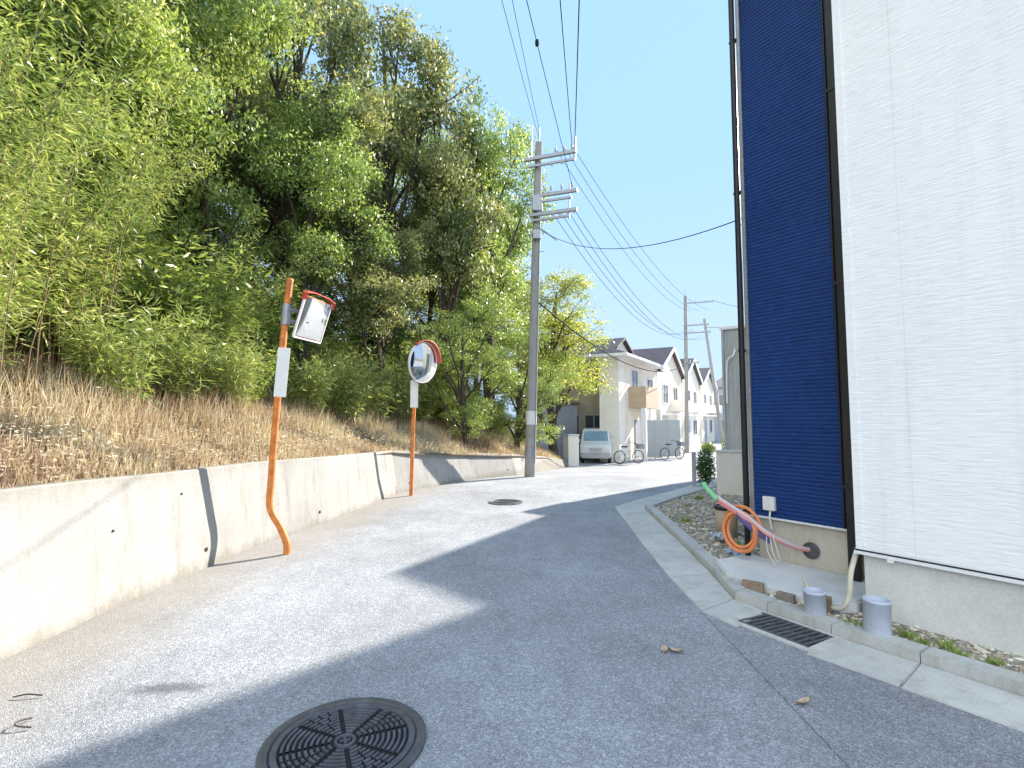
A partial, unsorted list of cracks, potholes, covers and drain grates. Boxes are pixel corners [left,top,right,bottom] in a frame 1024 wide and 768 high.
manhole cover [255,697,426,768]
drain grate [728,609,844,653]
